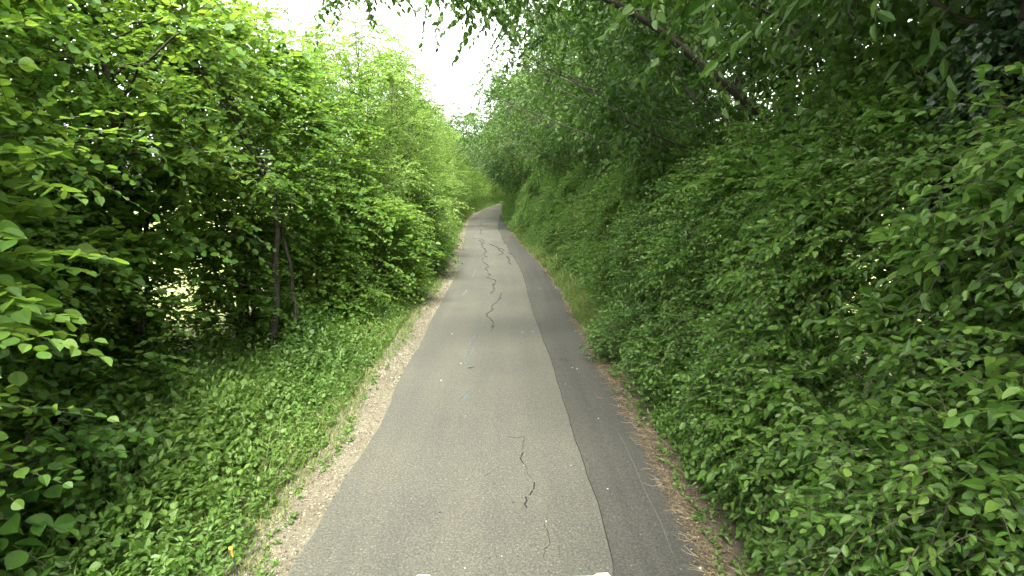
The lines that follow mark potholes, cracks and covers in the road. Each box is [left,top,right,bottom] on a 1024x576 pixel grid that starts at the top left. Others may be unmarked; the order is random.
crack [478,223,512,329]
